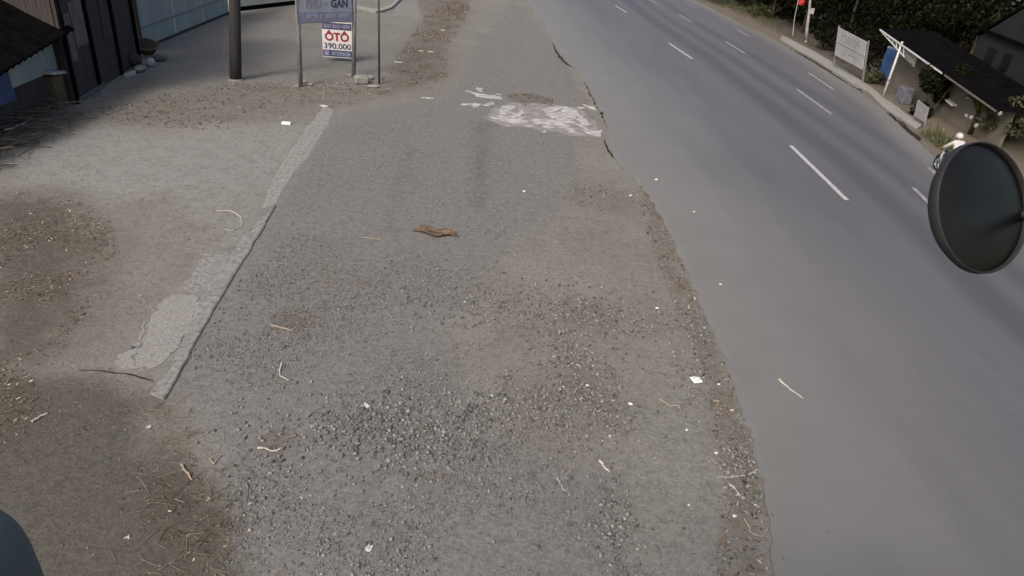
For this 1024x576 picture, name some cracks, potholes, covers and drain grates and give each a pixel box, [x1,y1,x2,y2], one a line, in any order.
crack [78,369,154,381]
crack [552,43,605,123]
